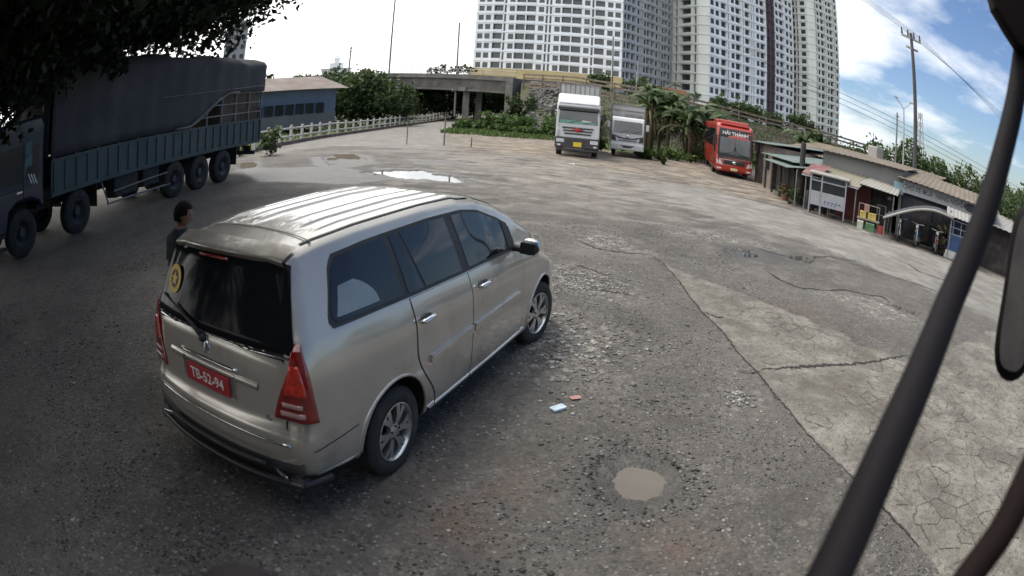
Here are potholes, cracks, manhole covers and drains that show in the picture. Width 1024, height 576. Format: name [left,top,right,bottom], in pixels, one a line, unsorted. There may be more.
crack [575,241,649,295]
crack [651,255,1024,564]
pothole [576,443,701,524]
pothole [785,254,821,266]
crack [752,246,943,293]
pothole [717,246,766,260]
